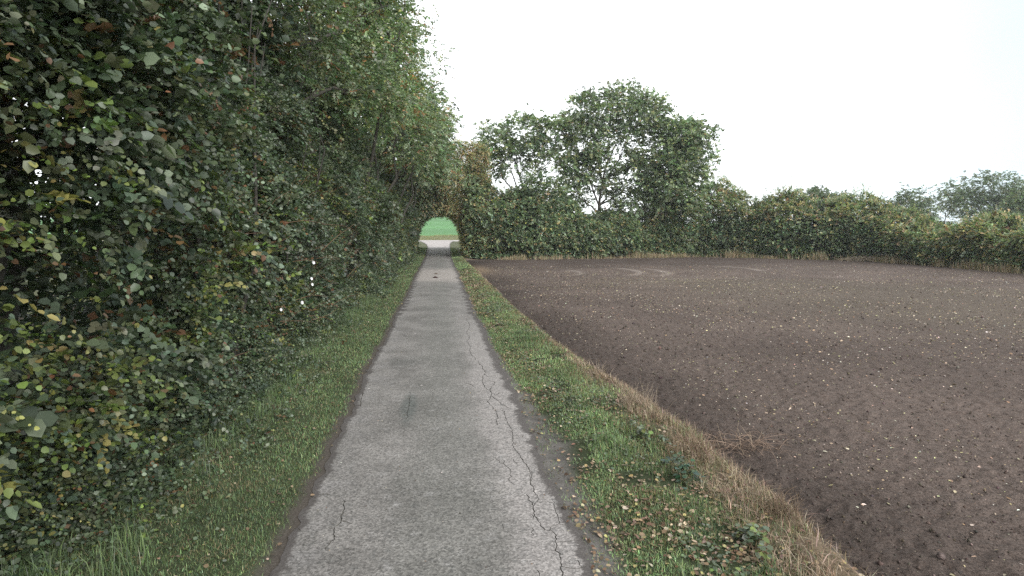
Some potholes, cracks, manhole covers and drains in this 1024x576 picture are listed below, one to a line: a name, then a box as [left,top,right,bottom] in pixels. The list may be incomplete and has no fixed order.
crack [314,489,352,551]
crack [466,318,587,576]
